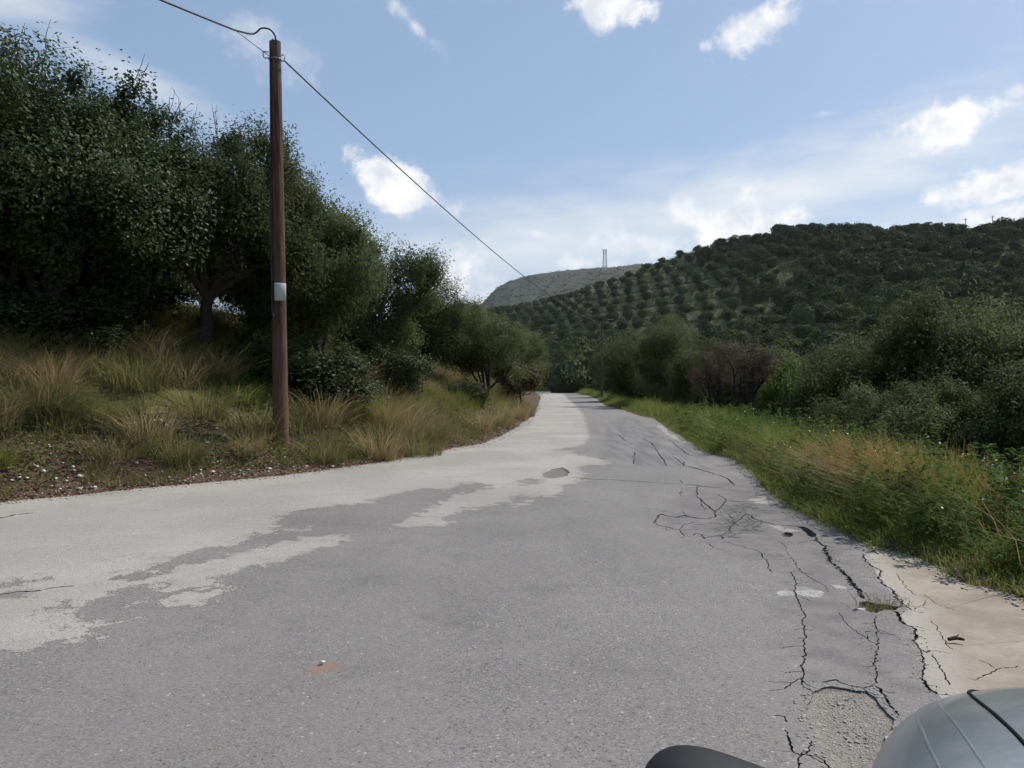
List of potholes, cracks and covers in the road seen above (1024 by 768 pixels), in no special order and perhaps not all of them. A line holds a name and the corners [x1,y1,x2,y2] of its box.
pothole [543,467,570,478]
crack [619,436,953,718]
crack [970,660,1018,680]
pothole [852,601,898,613]
pothole [806,686,894,768]
crack [774,715,830,768]
